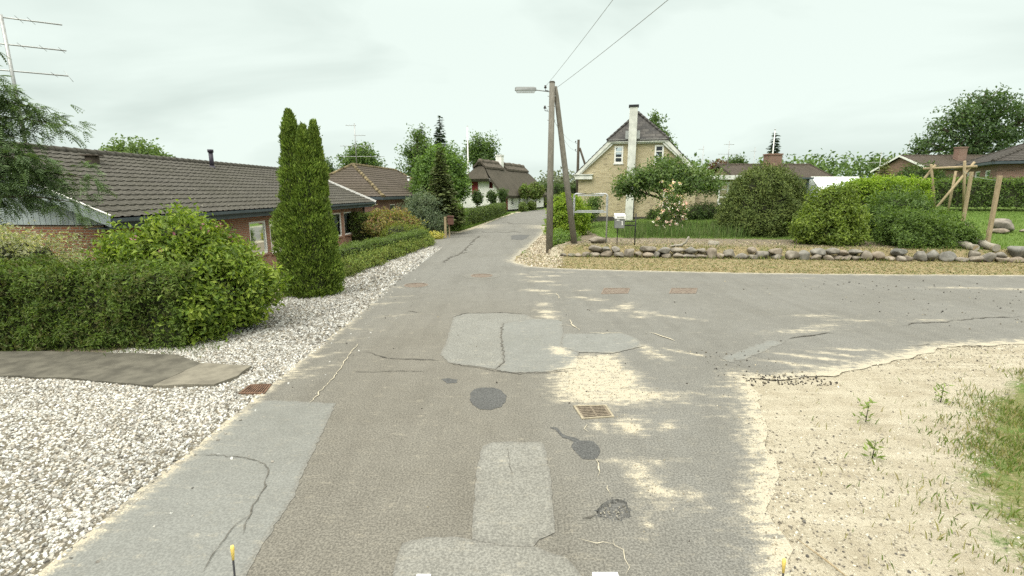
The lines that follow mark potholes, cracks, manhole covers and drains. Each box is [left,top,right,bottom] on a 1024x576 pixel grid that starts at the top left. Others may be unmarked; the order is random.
crack [453,312,568,374]
pothole [594,497,633,523]
drain grate [573,405,614,420]
drain grate [239,384,272,395]
crack [203,454,269,571]
